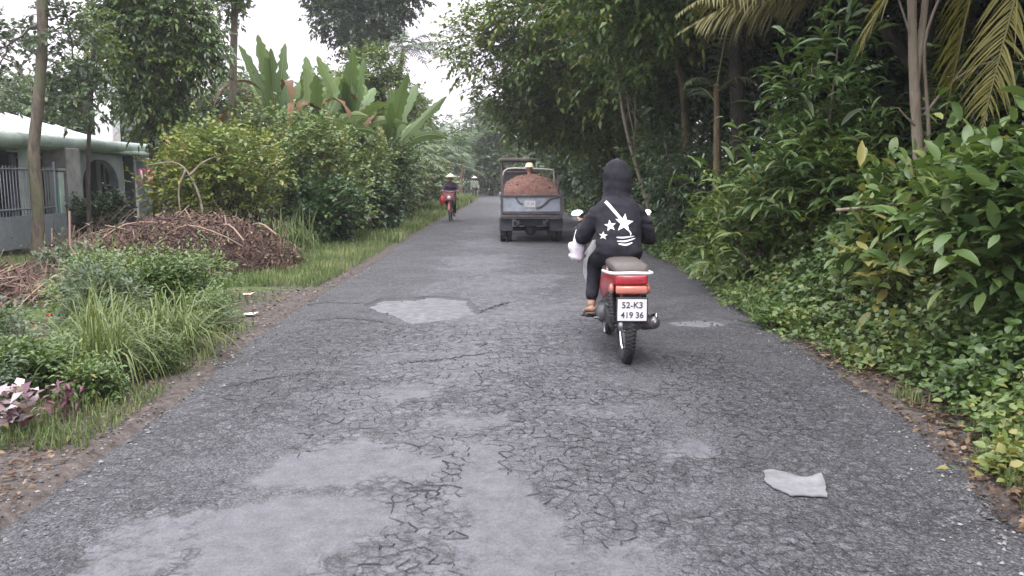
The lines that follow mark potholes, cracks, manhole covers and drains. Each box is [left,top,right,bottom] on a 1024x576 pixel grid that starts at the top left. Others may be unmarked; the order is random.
crack [201,302,836,576]
